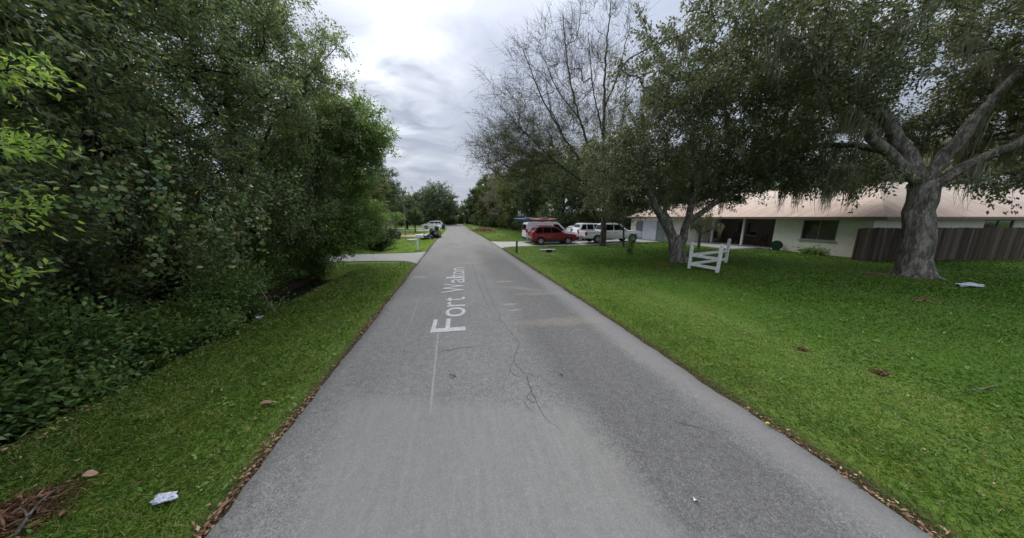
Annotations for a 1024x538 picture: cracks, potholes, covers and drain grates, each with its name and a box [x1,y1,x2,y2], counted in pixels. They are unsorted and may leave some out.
crack [474,272,562,432]
